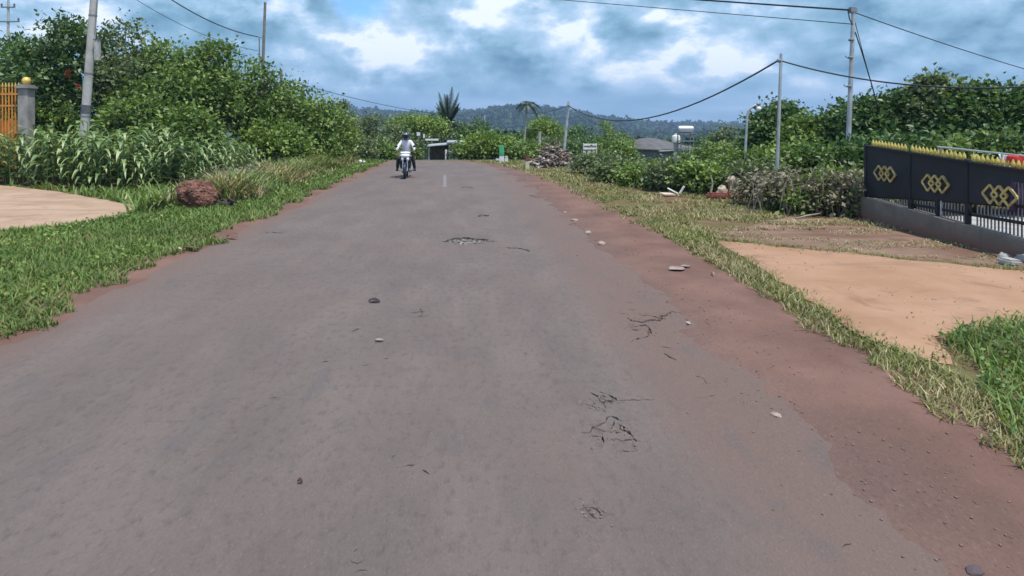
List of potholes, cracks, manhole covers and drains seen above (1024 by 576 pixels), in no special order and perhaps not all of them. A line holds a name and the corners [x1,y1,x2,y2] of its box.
crack [574,497,614,537]
crack [620,302,690,360]
crack [574,392,655,452]
